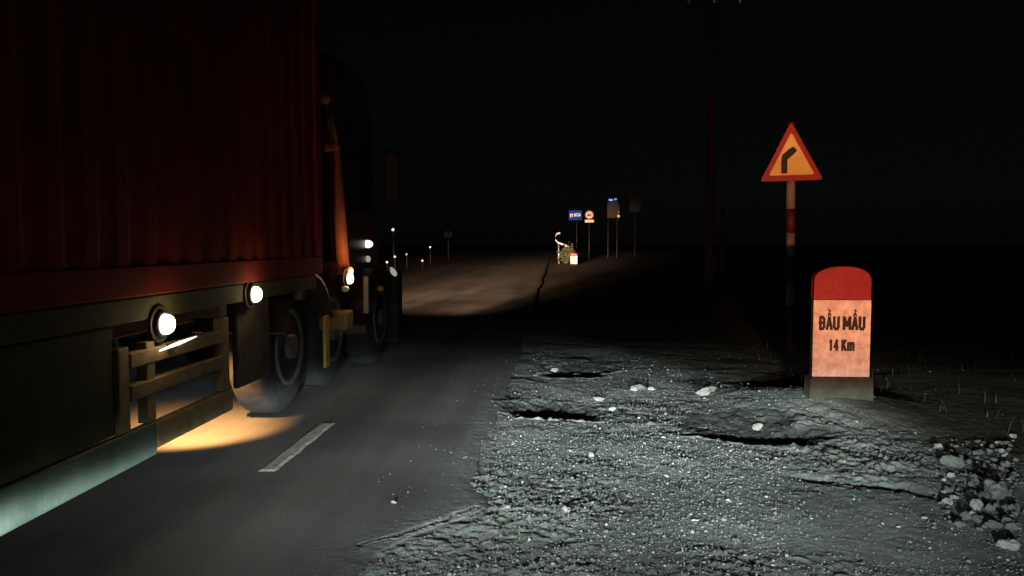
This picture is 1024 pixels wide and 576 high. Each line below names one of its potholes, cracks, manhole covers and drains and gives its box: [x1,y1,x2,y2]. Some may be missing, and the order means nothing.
crack [361,506,478,546]
pothole [491,396,614,423]
pothole [533,358,625,380]
pothole [664,408,853,449]
